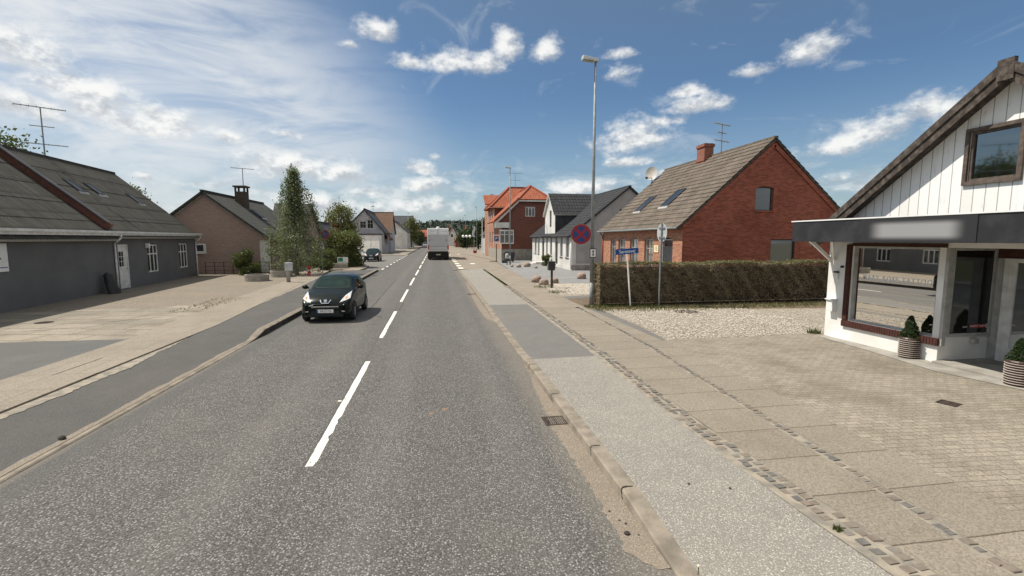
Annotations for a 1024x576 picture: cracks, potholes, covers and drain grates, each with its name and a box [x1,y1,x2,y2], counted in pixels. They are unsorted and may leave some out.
drain grate [541,416,568,426]
